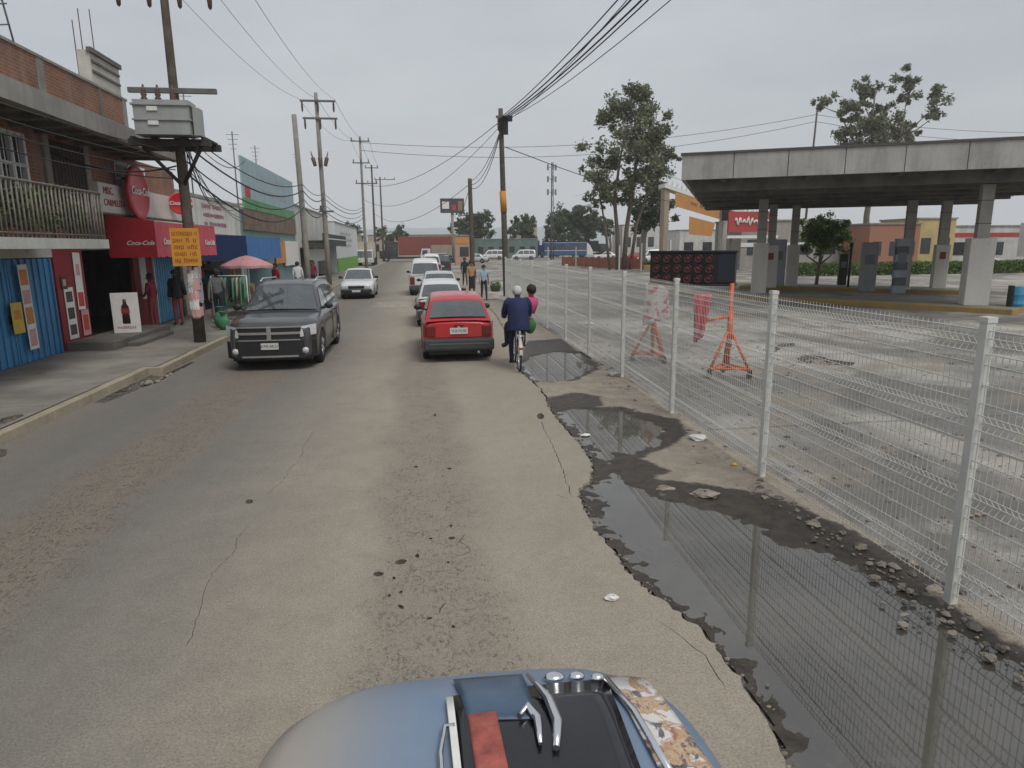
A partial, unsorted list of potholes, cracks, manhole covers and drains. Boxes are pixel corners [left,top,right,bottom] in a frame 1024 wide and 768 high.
pothole [796,355,854,366]
crack [185,528,246,647]
crack [657,619,725,687]
